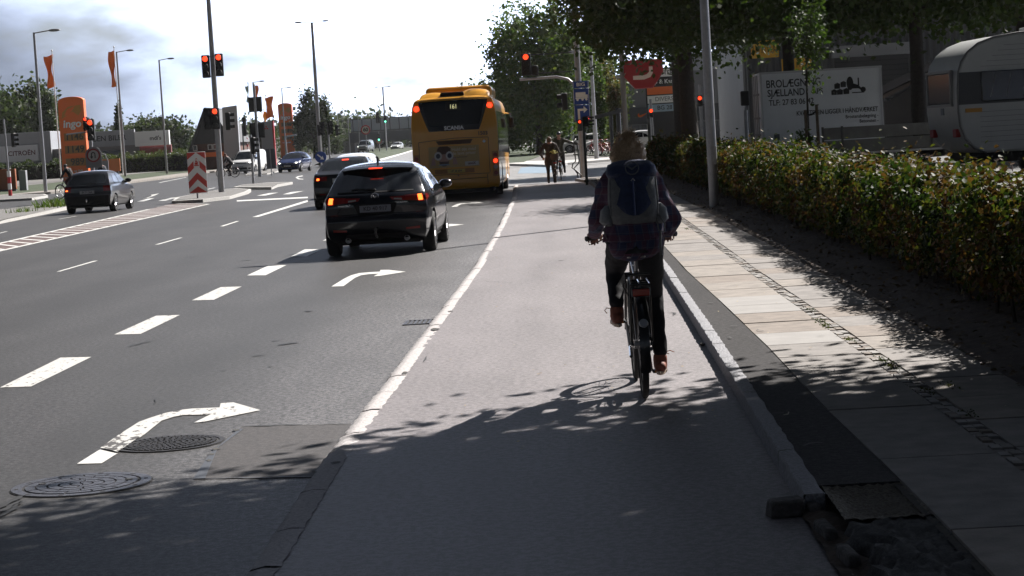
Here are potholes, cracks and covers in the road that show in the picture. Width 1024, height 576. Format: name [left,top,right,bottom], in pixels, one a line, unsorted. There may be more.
manhole cover [118,434,226,453]
manhole cover [9,472,153,498]
